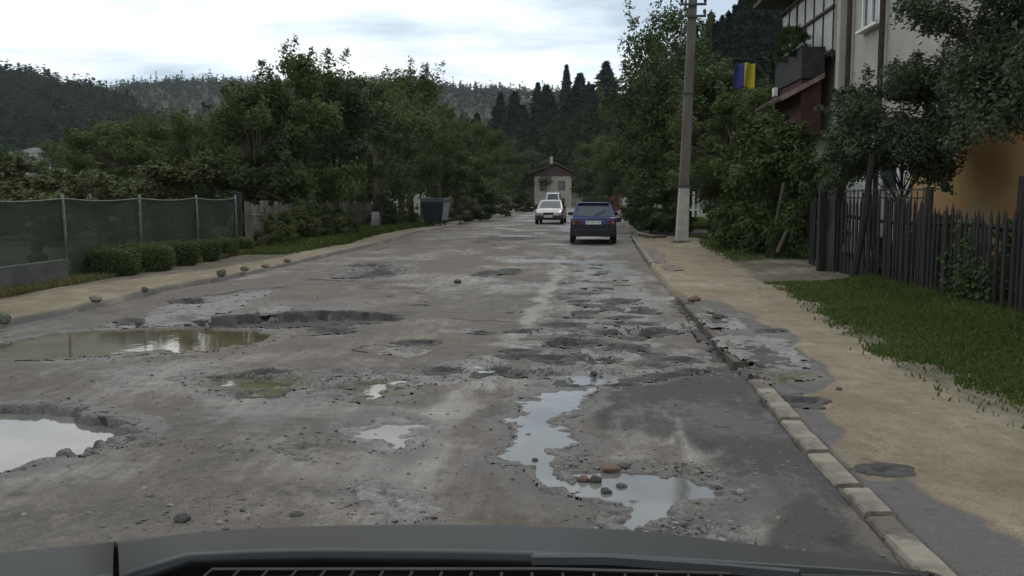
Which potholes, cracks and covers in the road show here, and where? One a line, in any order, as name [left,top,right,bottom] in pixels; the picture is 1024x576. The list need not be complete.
pothole [580,346,626,358]
pothole [597,297,644,305]
pothole [631,360,692,372]
pothole [646,356,706,364]
pothole [663,321,699,332]
pothole [242,368,291,379]
pothole [607,359,676,370]
pothole [257,306,294,324]
pothole [235,386,297,399]
pothole [541,337,615,349]
pothole [601,325,648,336]
